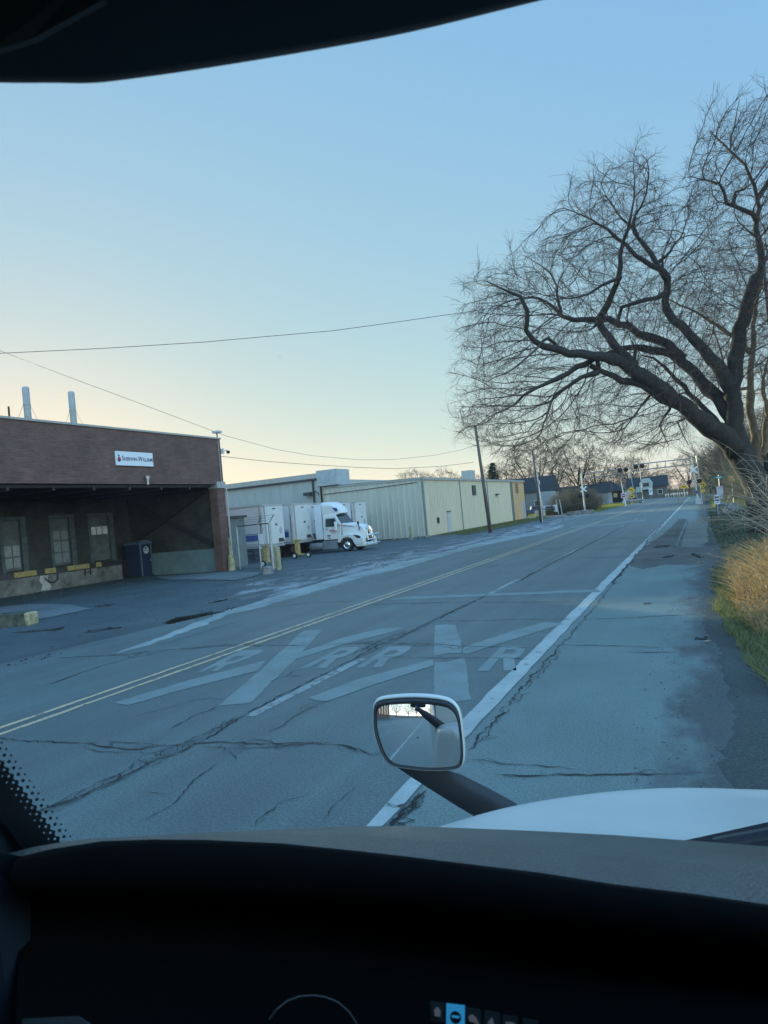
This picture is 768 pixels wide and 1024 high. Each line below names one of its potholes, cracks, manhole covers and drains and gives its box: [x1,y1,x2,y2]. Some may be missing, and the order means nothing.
crack [0,737,379,759]
pothole [162,609,228,624]
crack [382,790,426,826]
crack [139,763,217,822]
